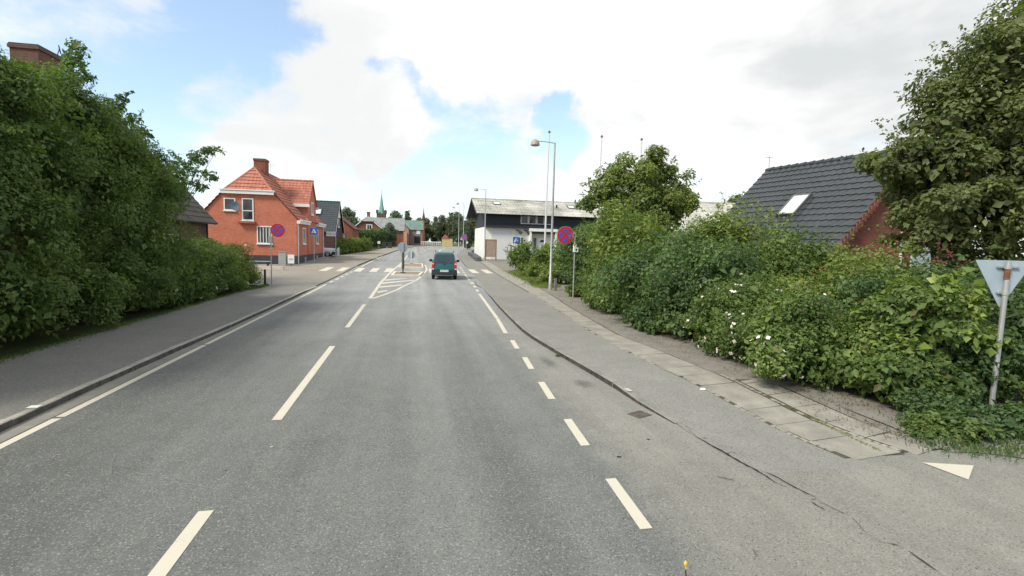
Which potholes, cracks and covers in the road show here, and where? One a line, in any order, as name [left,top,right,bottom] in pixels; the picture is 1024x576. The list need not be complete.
crack [686,426,863,529]
